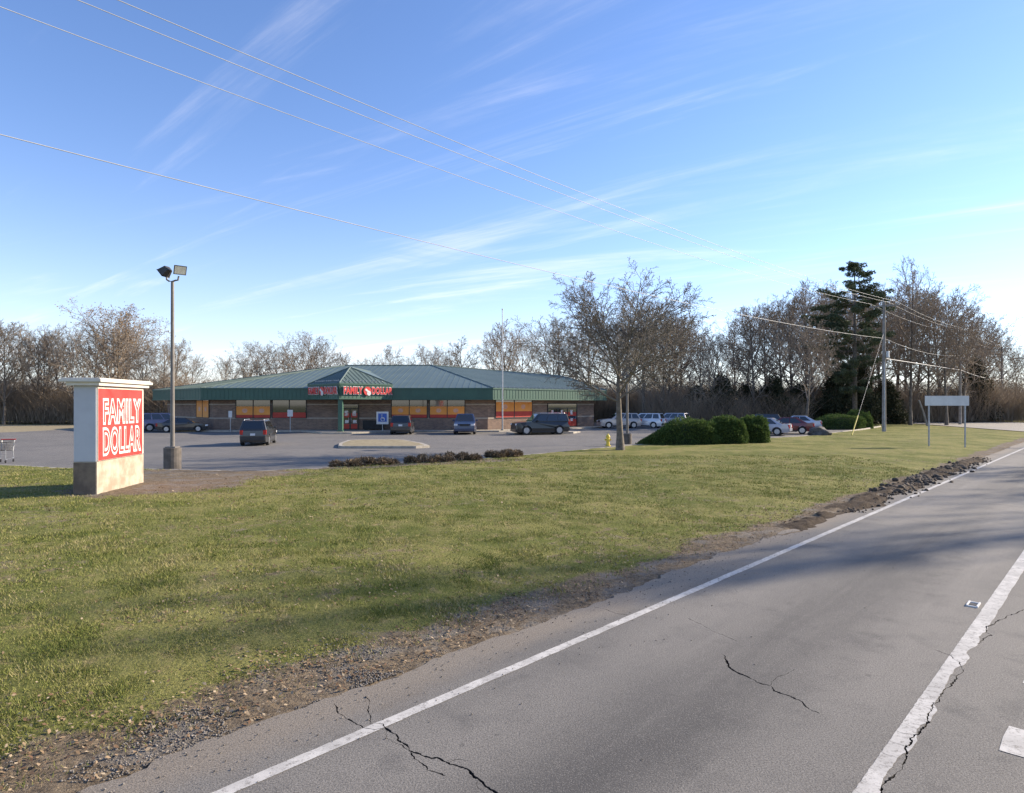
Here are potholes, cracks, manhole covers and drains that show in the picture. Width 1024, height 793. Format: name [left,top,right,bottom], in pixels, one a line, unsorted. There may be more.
crack [873,651,964,793]
crack [978,610,1023,644]
crack [335,697,498,793]
crack [690,619,819,713]
